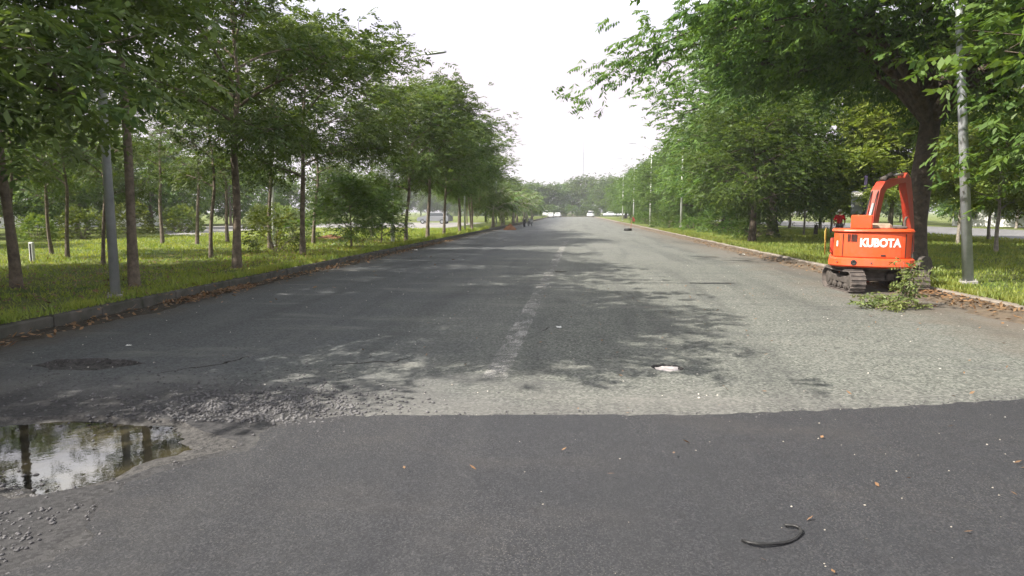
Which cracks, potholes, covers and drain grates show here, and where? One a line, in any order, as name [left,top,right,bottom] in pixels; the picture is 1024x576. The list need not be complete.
pothole [0,415,238,499]
crack [149,356,247,375]
